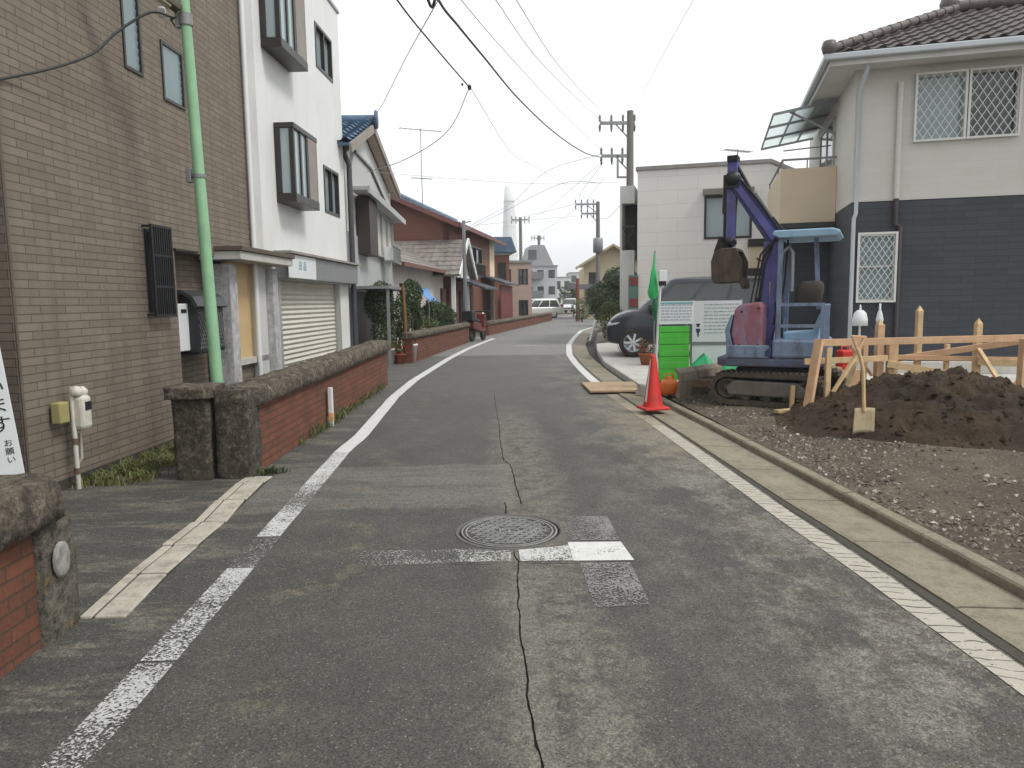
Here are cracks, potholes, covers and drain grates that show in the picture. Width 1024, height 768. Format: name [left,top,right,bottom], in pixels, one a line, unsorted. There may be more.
manhole cover [455,514,564,550]
crack [494,396,522,513]
crack [472,552,618,768]
